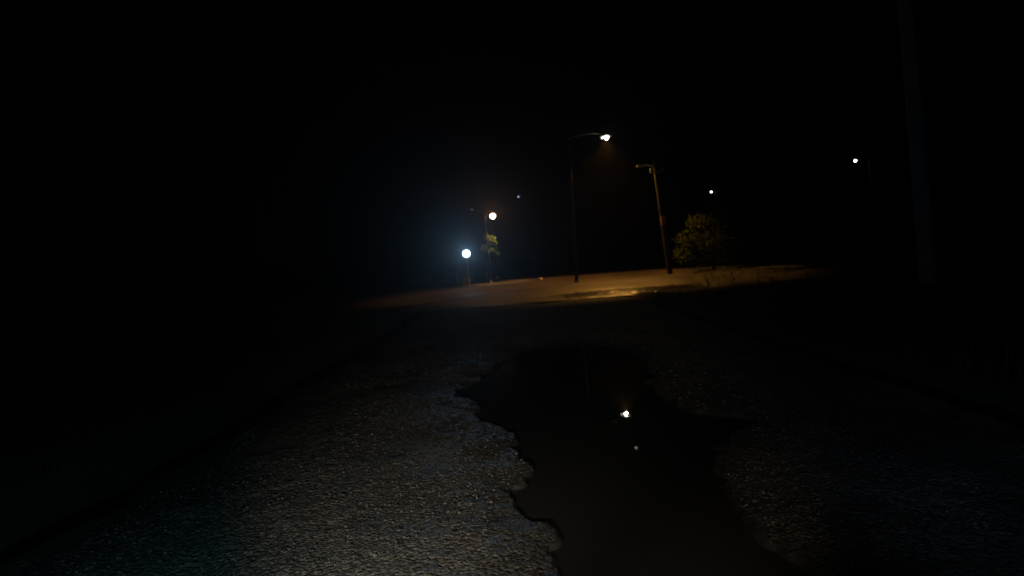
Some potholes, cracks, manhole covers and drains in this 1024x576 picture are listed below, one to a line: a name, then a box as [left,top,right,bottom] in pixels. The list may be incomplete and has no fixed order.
pothole [453,341,821,576]
